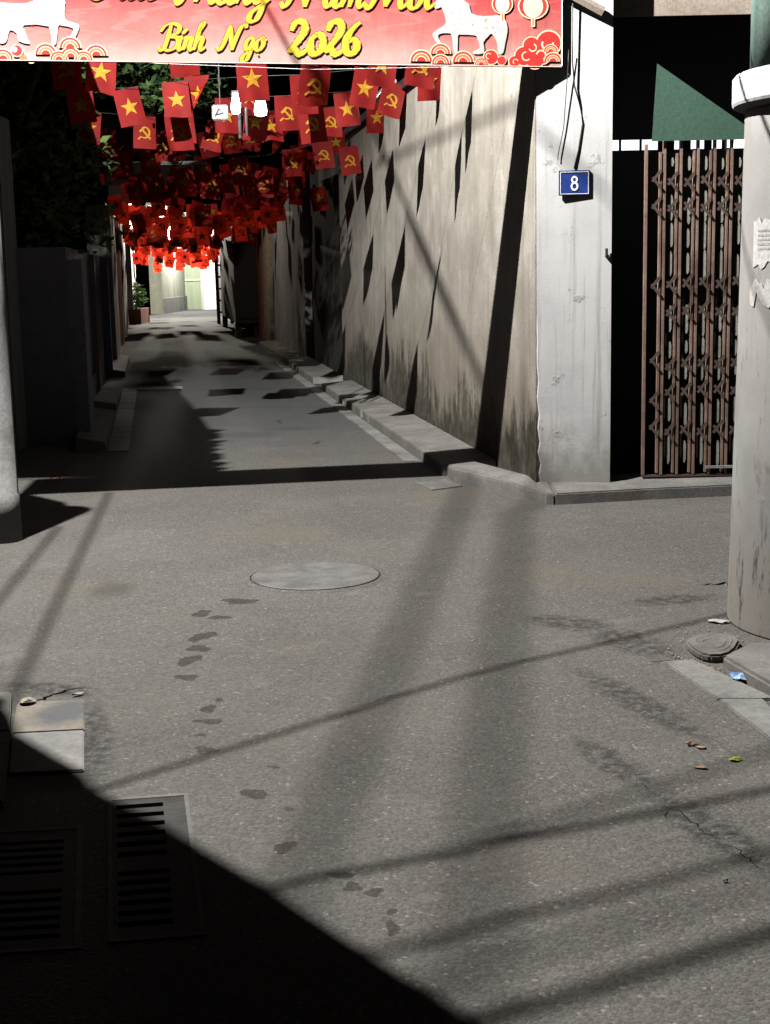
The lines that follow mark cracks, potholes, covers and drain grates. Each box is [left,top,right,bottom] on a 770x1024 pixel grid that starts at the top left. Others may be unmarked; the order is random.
drain grate [0,826,83,954]
crack [637,782,764,870]
manhole cover [243,562,387,593]
drain grate [108,793,207,943]
crack [25,687,86,702]
